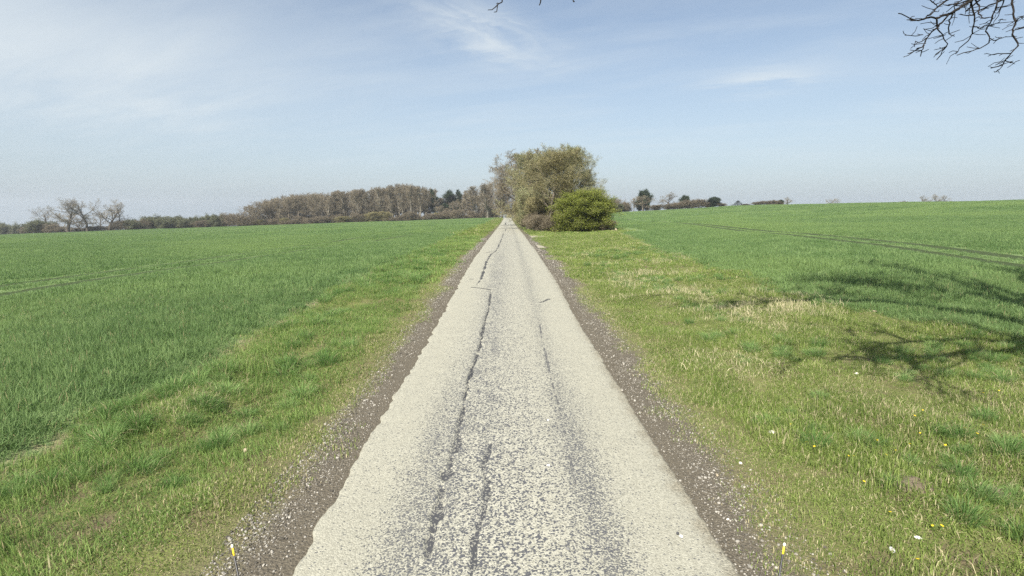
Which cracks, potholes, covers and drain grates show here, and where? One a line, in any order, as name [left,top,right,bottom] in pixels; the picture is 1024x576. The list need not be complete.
crack [539,325,577,484]
crack [426,223,506,576]
